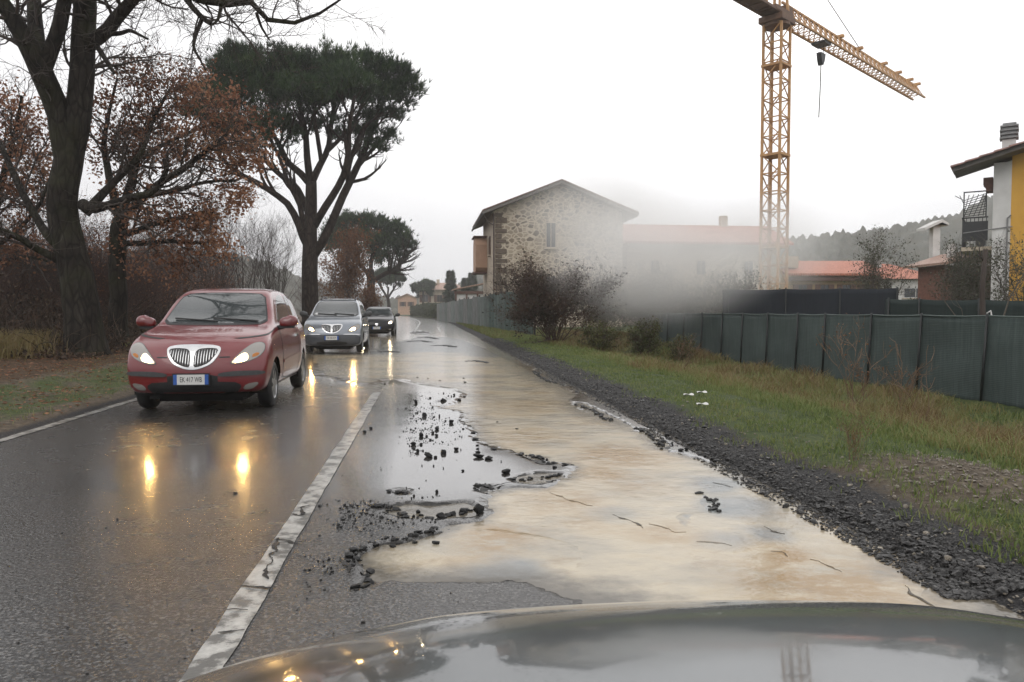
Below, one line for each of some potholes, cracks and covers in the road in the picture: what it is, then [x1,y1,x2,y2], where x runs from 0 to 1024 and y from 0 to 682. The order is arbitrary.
pothole [473,483,495,493]
pothole [370,501,485,519]
pothole [518,452,556,464]
pothole [345,526,582,583]
pothole [350,568,375,589]
crack [906,586,935,607]
pothole [509,471,565,485]
